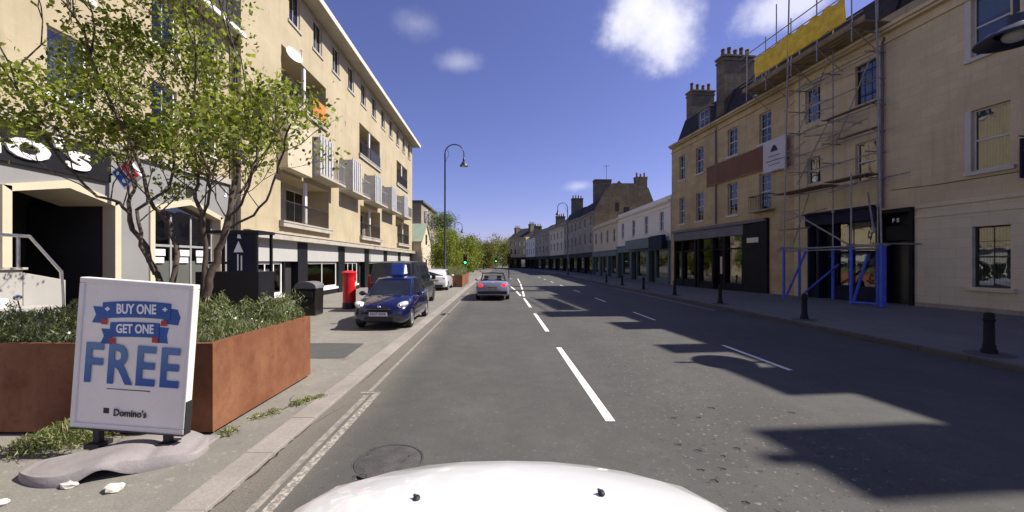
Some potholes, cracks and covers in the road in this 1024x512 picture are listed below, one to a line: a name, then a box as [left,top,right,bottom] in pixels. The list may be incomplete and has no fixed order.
manhole cover [351,444,424,479]
